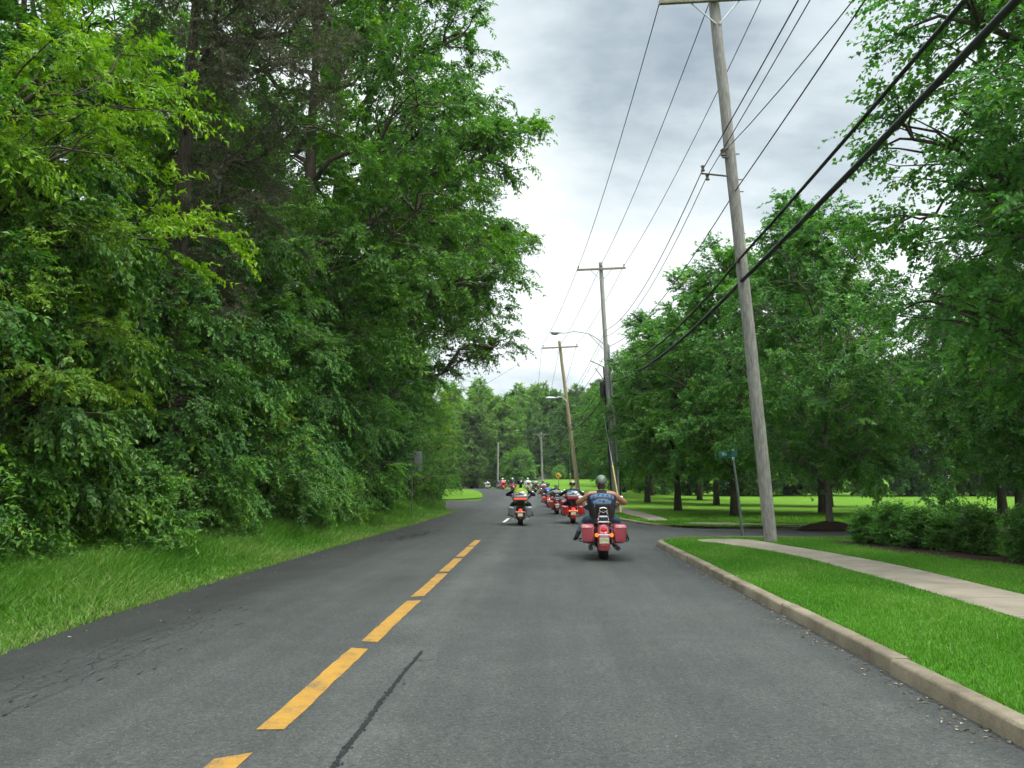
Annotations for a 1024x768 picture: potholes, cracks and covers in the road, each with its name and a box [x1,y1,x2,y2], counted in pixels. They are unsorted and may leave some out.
crack [0,607,247,716]
